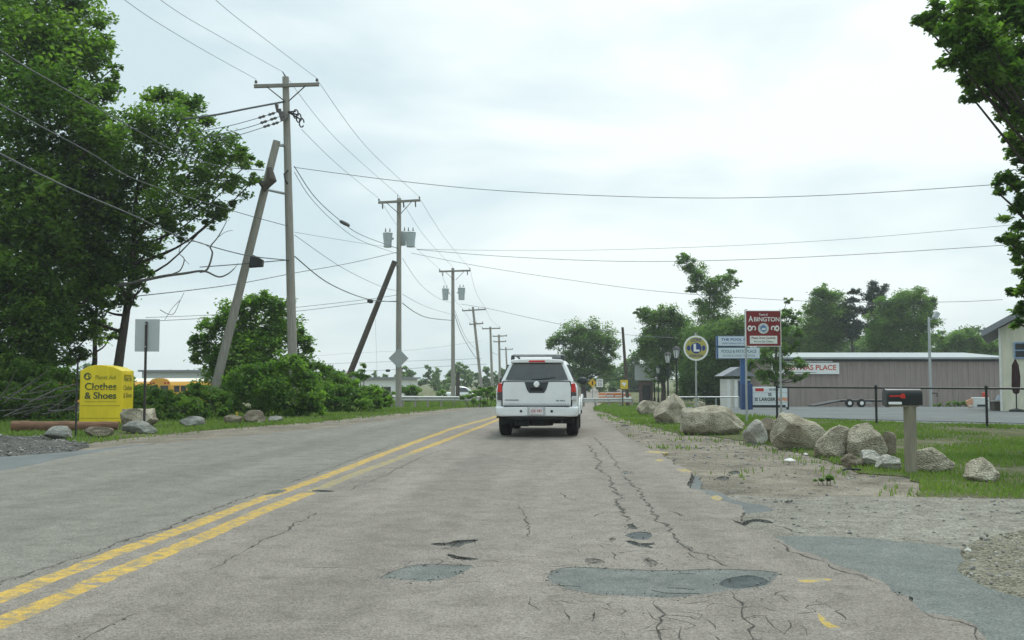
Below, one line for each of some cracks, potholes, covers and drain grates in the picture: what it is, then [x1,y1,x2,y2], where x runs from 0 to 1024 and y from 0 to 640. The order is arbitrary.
pothole [719,575,768,588]
crack [210,513,317,570]
crack [552,439,876,640]
